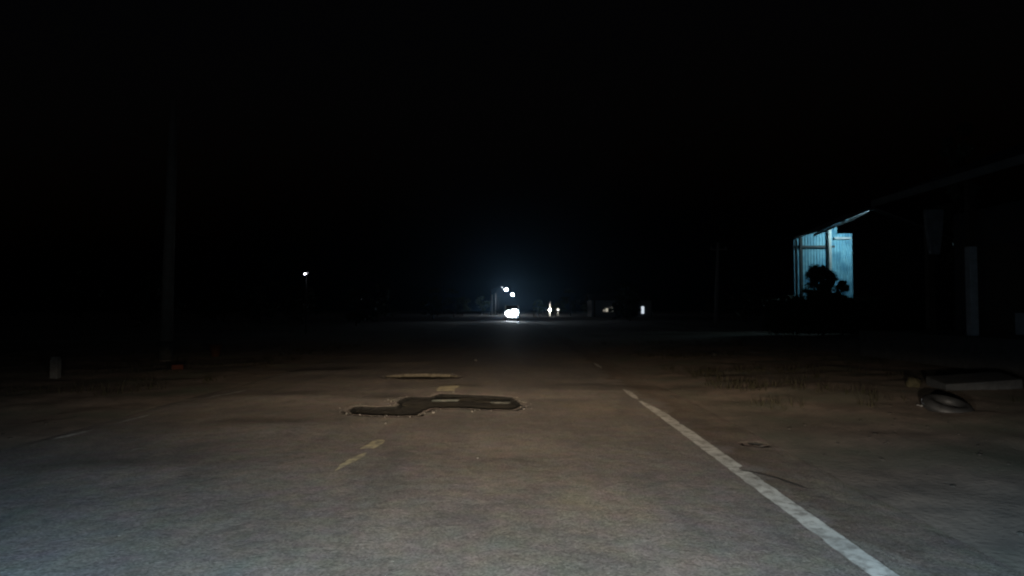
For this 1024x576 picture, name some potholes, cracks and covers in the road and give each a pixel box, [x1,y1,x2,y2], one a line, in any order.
crack [740,470,808,489]
pothole [344,393,526,417]
